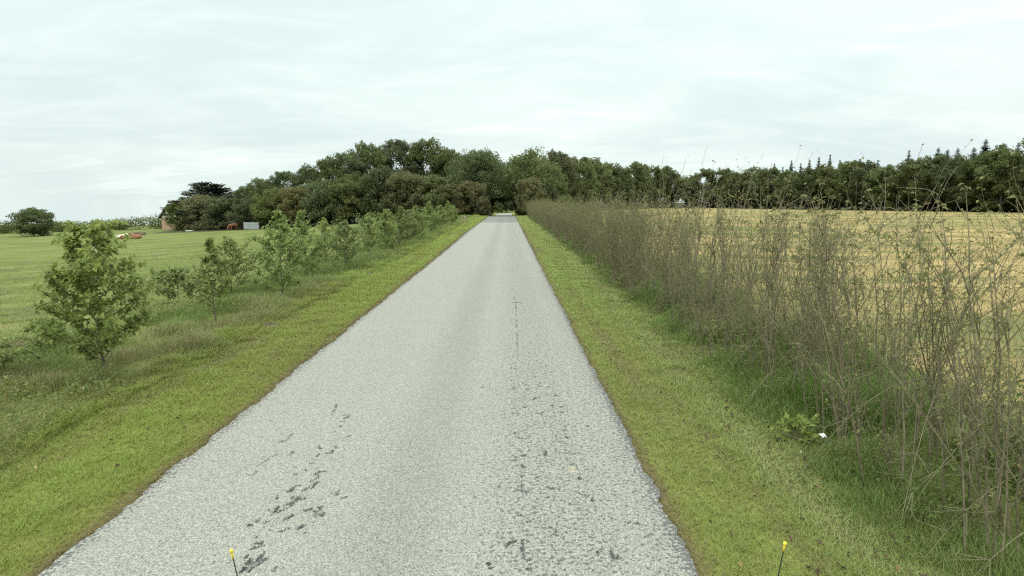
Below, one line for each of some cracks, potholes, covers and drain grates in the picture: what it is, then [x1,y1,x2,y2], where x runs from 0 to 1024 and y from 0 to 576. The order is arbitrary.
crack [480,365,622,570]
